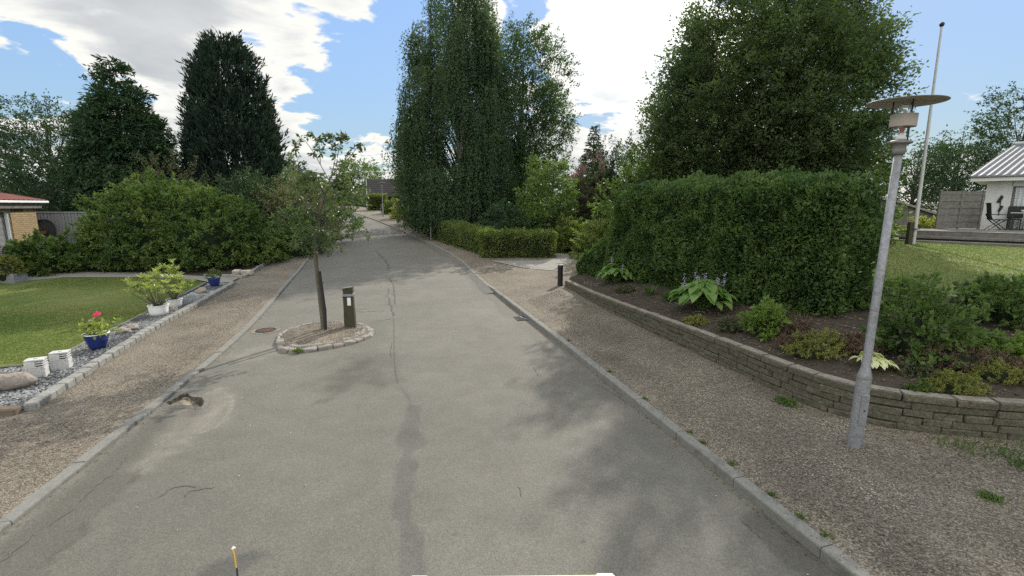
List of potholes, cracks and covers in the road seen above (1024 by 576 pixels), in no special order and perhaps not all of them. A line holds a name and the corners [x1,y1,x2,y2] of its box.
pothole [160,392,210,410]
crack [159,485,213,498]
crack [0,457,127,562]
